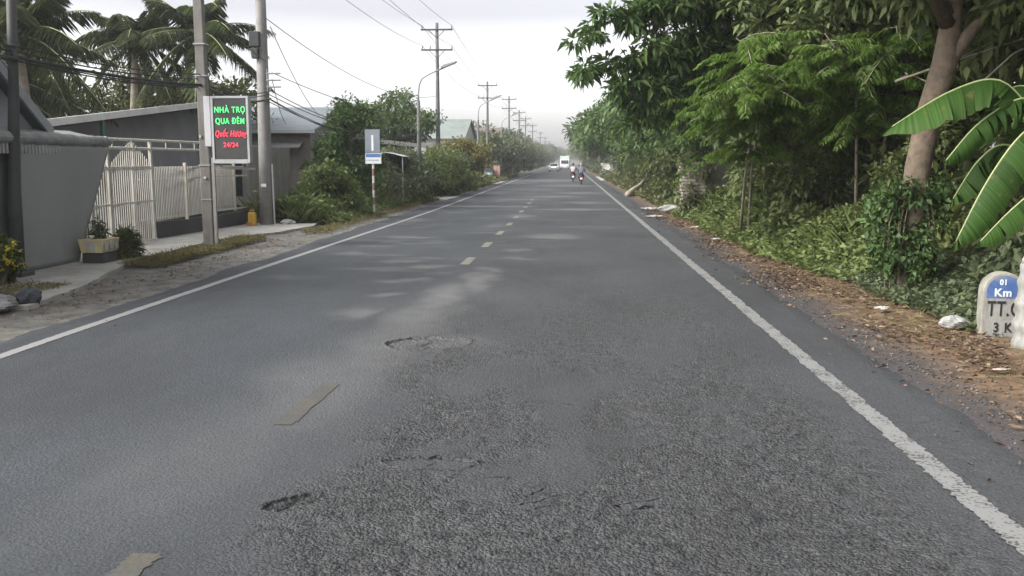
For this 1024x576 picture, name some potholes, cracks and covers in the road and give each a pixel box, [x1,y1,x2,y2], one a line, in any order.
pothole [378,336,475,352]
pothole [258,489,325,513]
crack [615,497,669,511]
